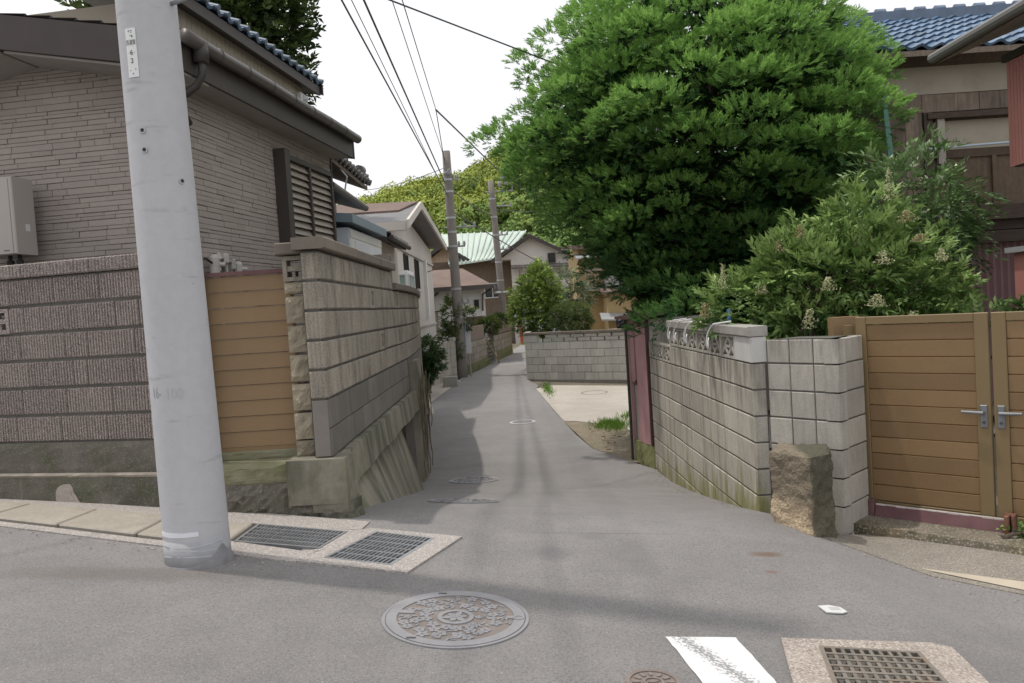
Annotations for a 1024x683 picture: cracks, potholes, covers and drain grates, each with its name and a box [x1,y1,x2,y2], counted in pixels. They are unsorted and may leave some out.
manhole cover [625,669,682,683]
manhole cover [448,476,499,484]
drain grate [297,528,462,574]
drain grate [234,523,348,550]
manhole cover [381,591,529,650]
drain grate [781,638,989,683]
